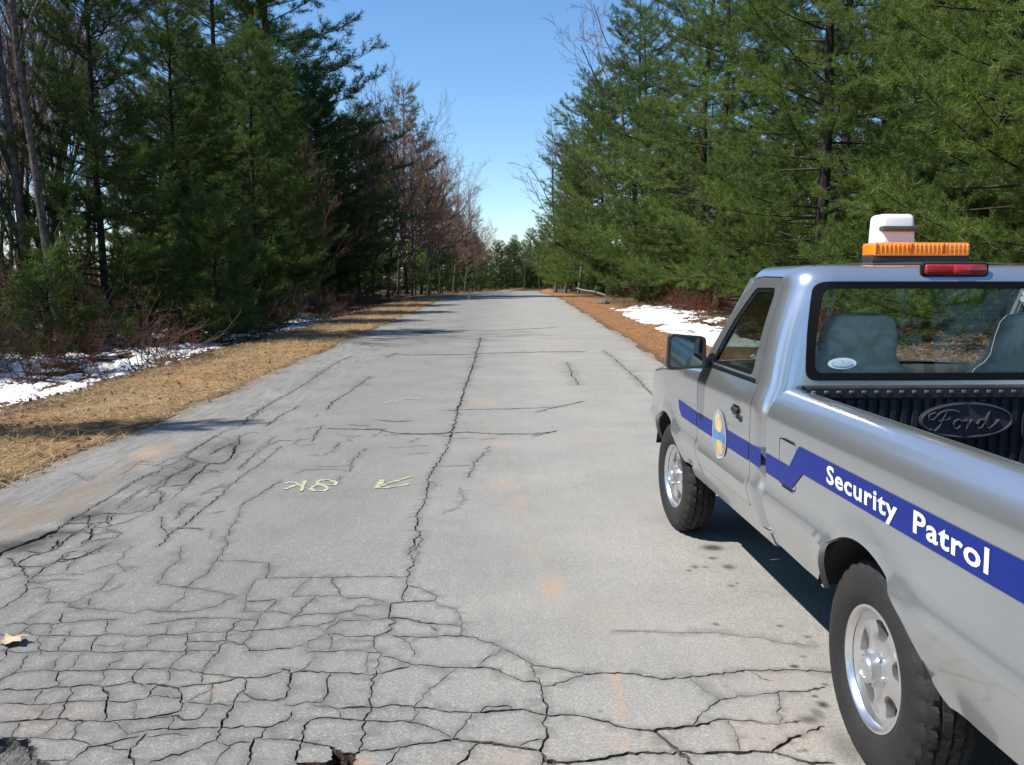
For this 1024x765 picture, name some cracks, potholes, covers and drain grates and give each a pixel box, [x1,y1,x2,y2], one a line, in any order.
crack [0,328,834,765]
pothole [296,746,360,765]
pothole [0,737,51,765]
